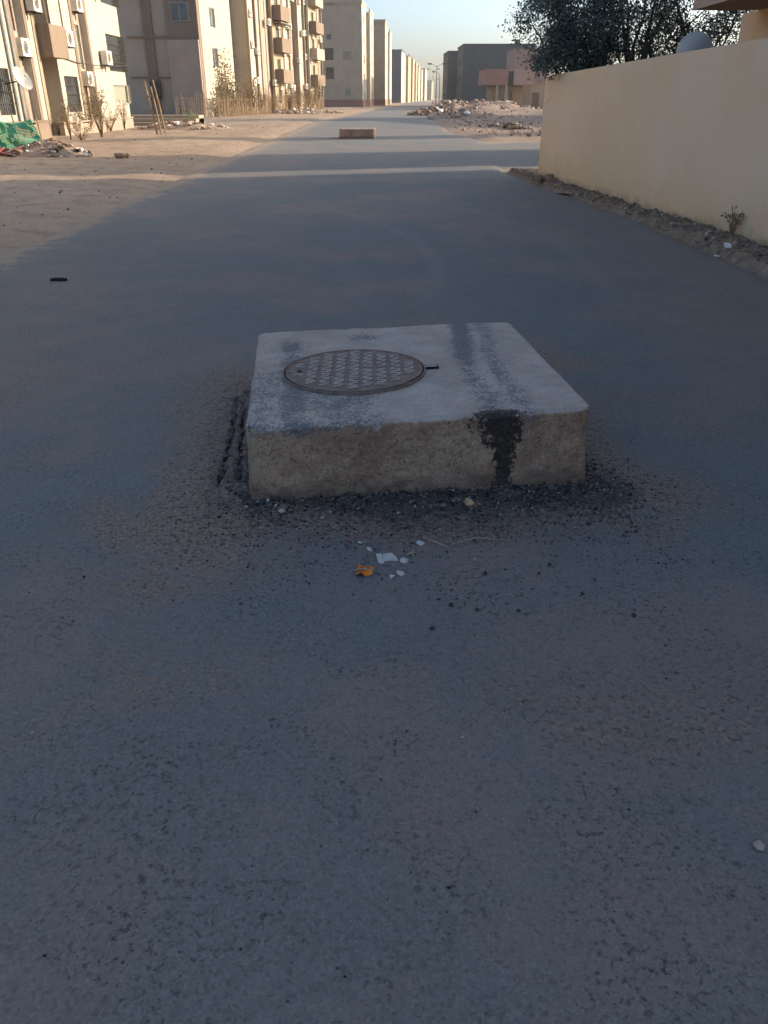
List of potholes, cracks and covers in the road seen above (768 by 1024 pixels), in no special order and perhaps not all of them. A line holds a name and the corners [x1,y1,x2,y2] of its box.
manhole cover [283,349,439,396]
crack [217,397,246,487]
